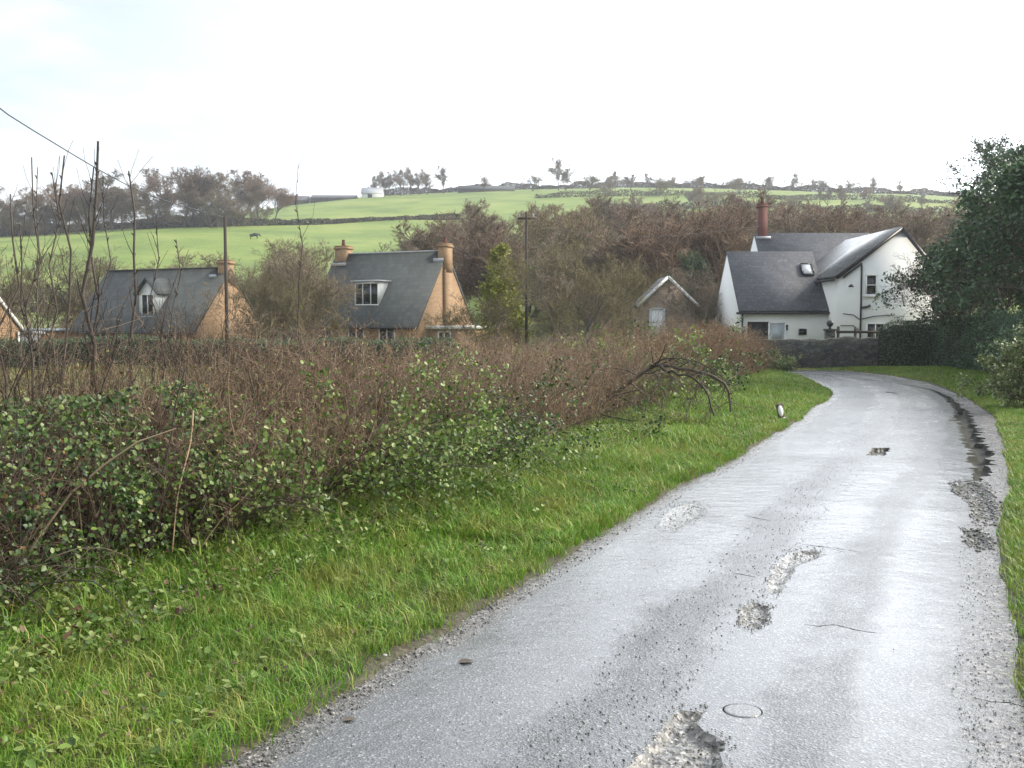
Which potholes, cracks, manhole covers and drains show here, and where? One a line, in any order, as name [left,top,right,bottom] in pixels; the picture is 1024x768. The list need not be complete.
pothole [959,529,994,550]
pothole [739,603,772,630]
manhole cover [722,703,763,718]
pothole [765,550,822,594]
pothole [952,482,1001,521]
pothole [659,504,707,531]
pothole [627,710,726,768]
pothole [867,448,890,456]
